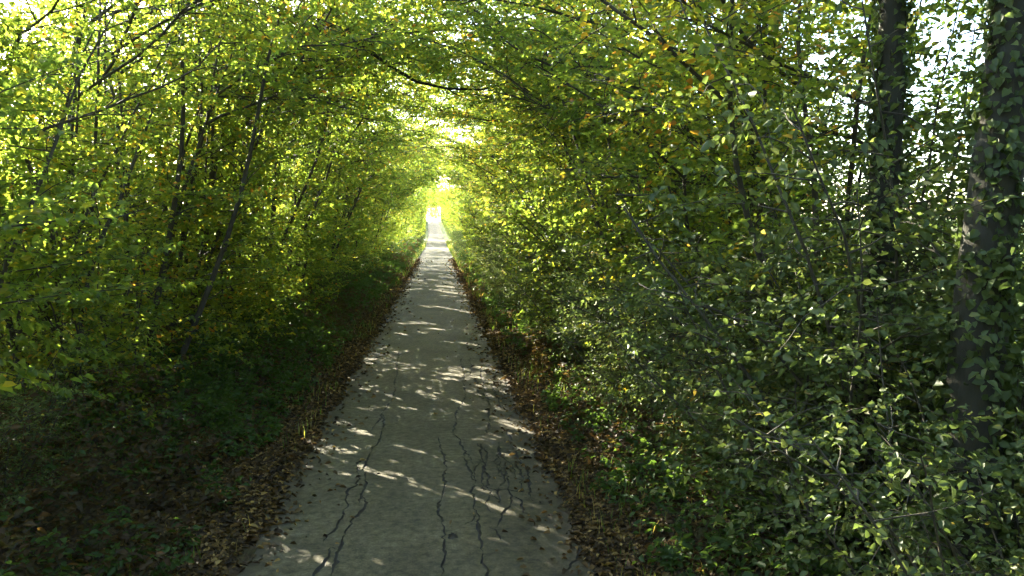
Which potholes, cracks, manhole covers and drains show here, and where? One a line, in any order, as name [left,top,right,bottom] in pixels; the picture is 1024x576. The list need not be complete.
crack [312,353,400,576]
crack [436,358,533,576]
